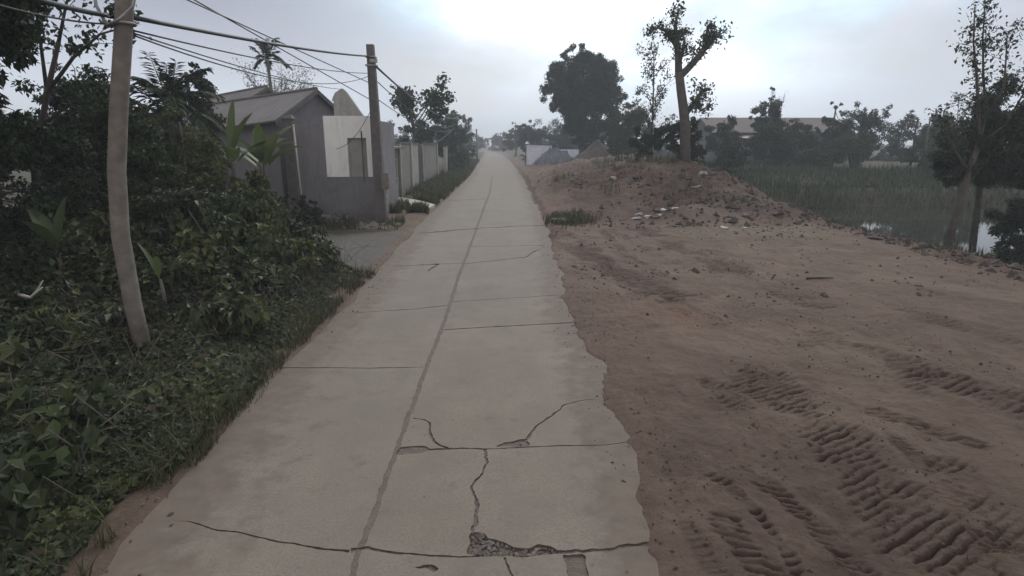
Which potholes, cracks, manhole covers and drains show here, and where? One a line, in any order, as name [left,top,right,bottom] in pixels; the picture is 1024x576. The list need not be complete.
pothole [467,532,558,558]
pothole [563,554,589,576]
crack [470,398,598,533]
crack [187,521,350,553]
crack [413,418,449,450]
